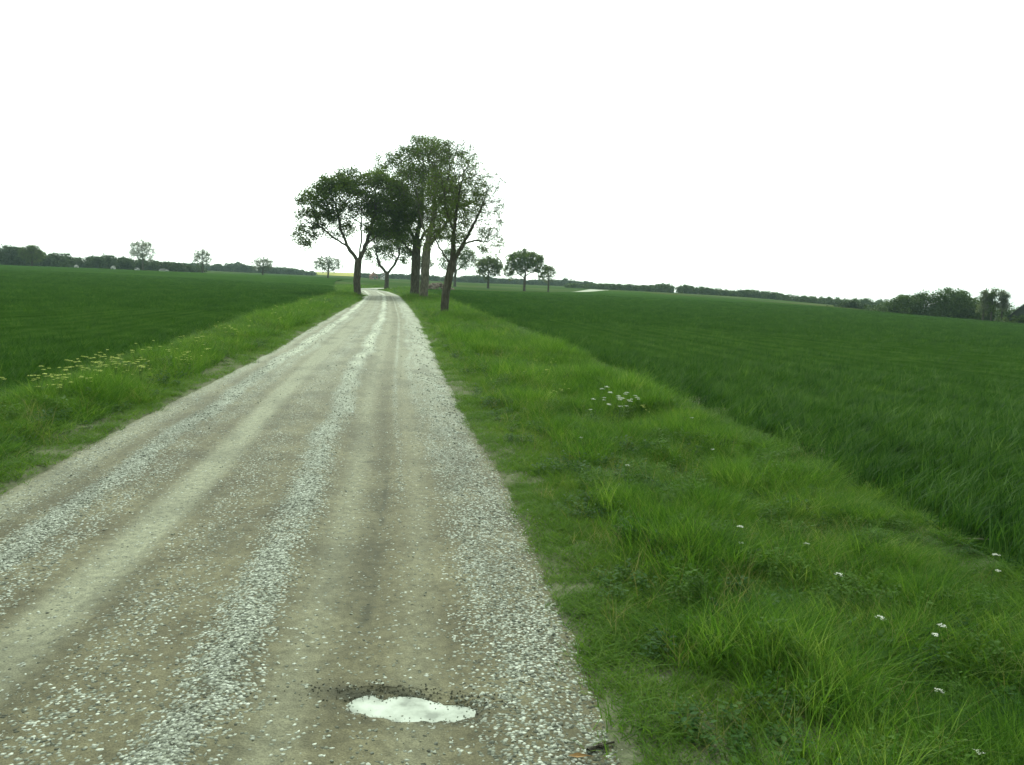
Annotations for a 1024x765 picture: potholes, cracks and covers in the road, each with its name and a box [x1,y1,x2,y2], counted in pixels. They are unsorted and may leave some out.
pothole [334,684,489,730]
